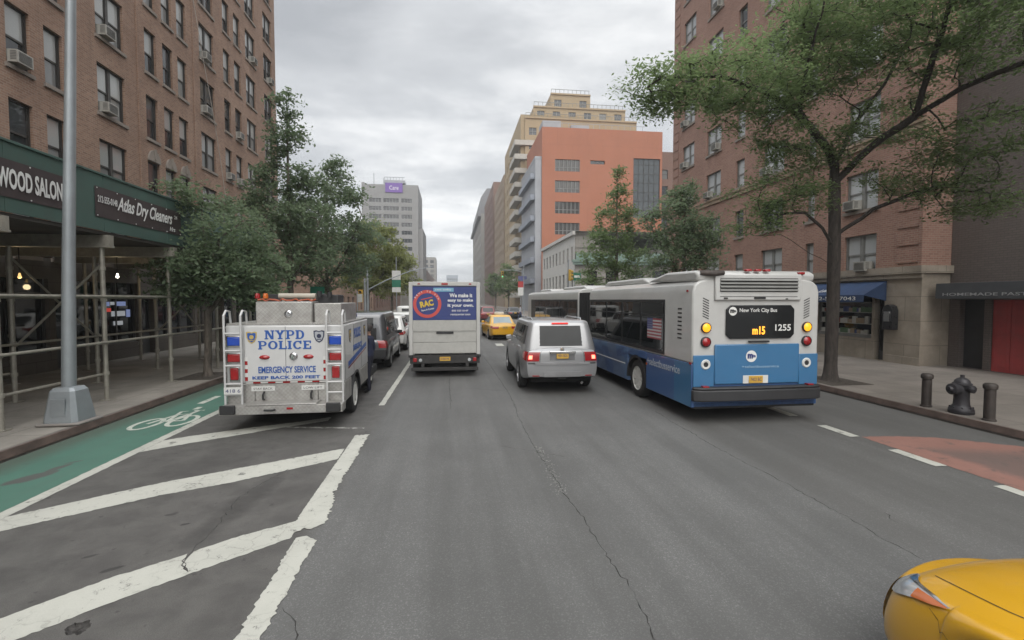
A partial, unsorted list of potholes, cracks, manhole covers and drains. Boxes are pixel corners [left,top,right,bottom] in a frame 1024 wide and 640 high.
crack [659,413,916,556]
crack [182,470,287,572]
